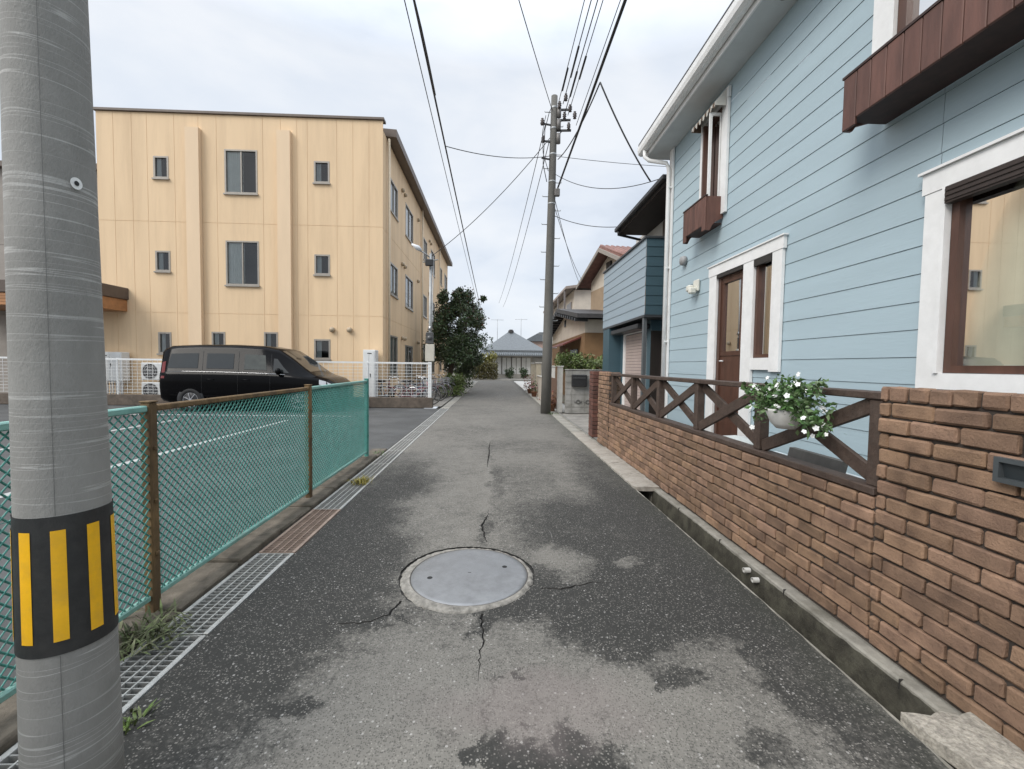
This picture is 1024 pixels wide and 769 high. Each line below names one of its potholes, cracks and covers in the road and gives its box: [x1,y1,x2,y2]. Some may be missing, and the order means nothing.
drain grate [401,432,424,440]
crack [541,581,599,590]
drain grate [314,482,370,510]
drain grate [372,450,404,464]
manhole cover [398,547,534,618]
crack [327,601,402,625]
drain grate [349,463,390,483]
drain grate [155,553,294,637]
drain grate [389,440,415,451]
drain grate [258,509,341,554]
